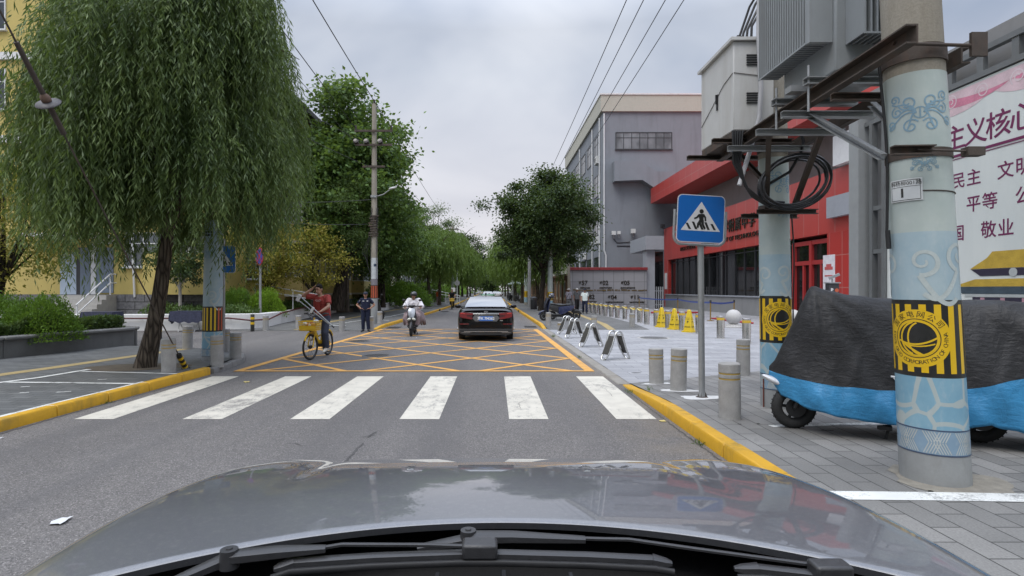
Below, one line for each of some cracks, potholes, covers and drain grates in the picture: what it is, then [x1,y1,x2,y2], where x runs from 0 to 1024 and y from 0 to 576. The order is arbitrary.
crack [344,432,376,462]
